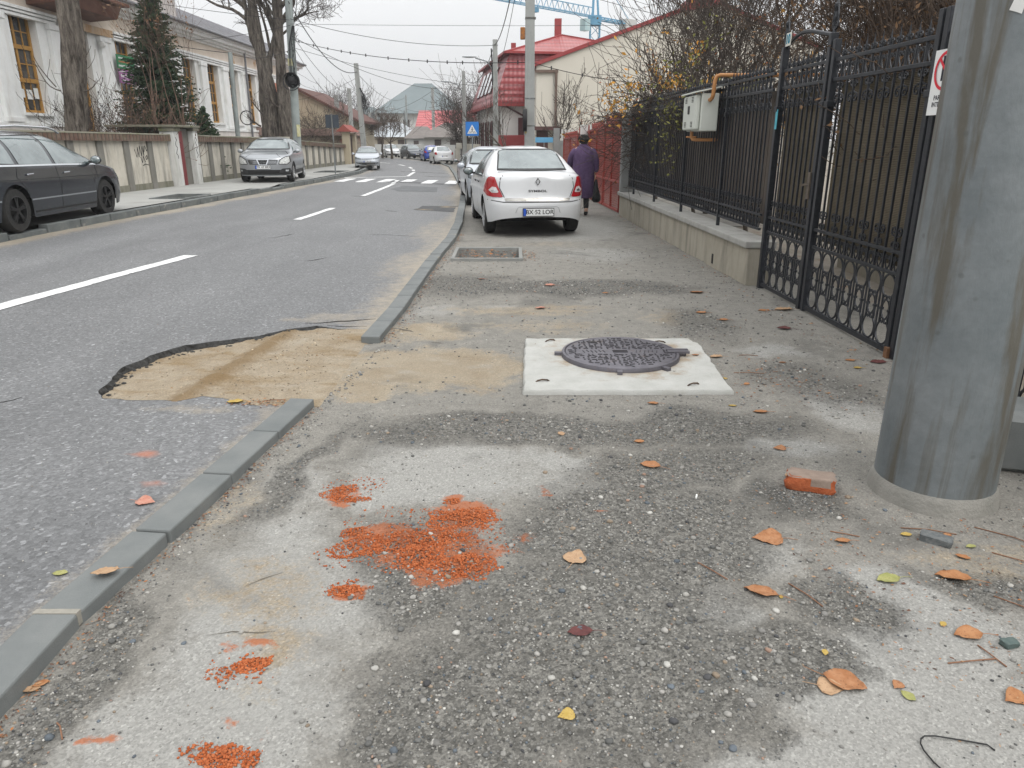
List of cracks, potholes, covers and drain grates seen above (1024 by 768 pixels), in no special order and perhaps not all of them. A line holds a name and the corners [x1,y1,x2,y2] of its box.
pothole [98,326,368,407]
manhole cover [554,337,690,375]
